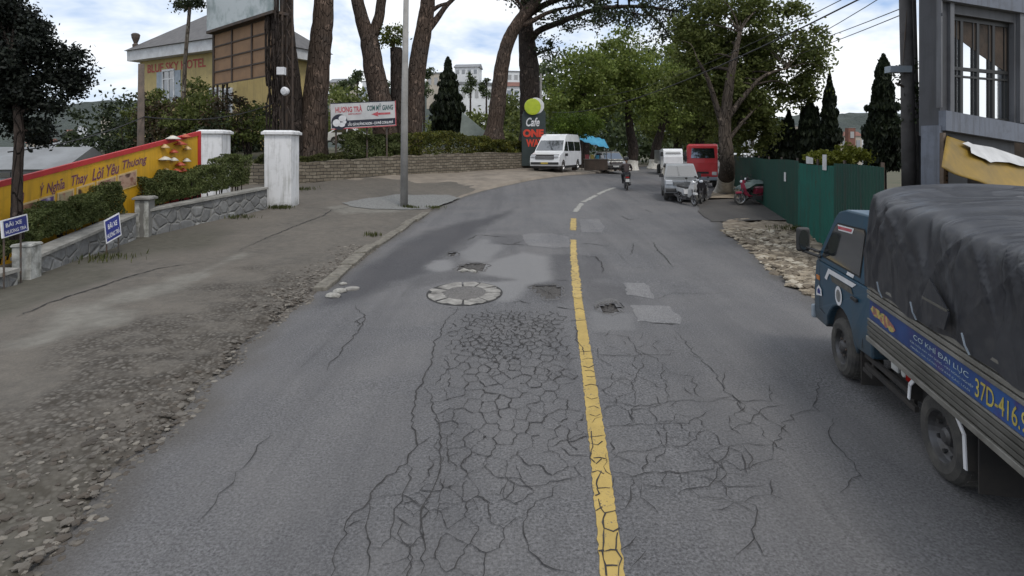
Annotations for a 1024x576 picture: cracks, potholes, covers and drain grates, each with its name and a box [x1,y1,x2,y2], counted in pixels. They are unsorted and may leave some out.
crack [209,433,271,510]
crack [828,417,862,491]
pothole [452,262,492,273]
pothole [527,283,566,301]
crack [331,271,822,576]
manhole cover [426,282,503,306]
pothole [595,302,623,315]
